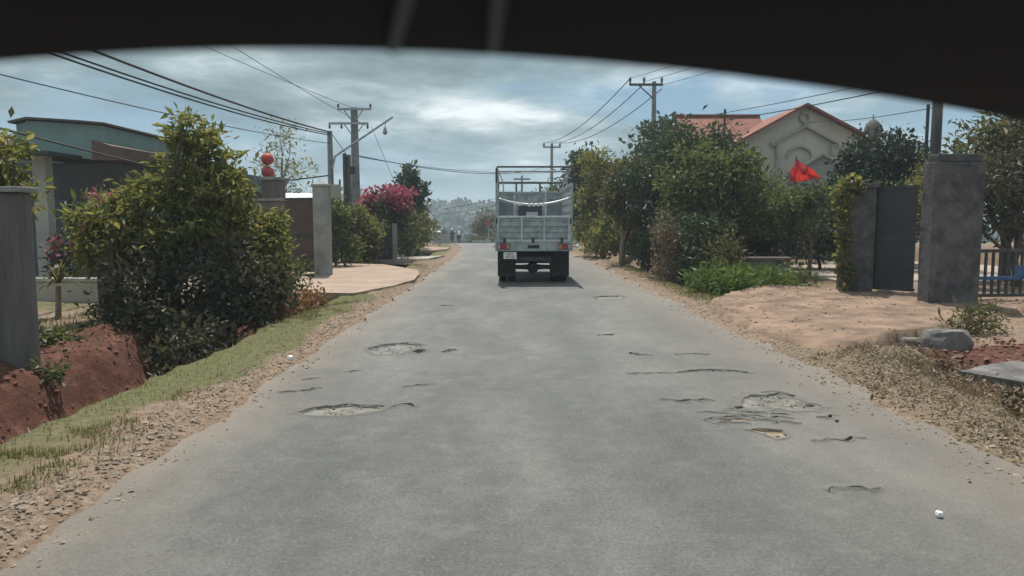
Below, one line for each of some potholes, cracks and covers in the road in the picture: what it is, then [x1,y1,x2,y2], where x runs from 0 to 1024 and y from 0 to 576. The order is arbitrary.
pothole [703,390,825,424]
crack [279,377,322,393]
pothole [294,402,390,416]
pothole [745,427,789,439]
pothole [365,341,426,355]
crack [826,484,881,492]
